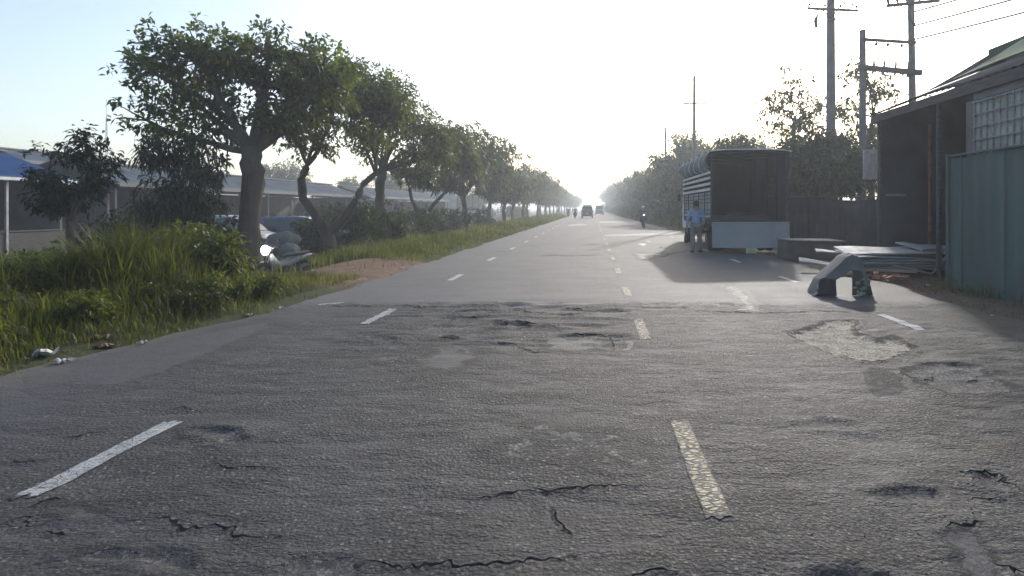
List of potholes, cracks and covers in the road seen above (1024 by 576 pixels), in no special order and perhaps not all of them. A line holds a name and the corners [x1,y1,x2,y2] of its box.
crack [353,554,578,575]
pothole [860,488,945,504]
pothole [187,426,249,445]
crack [456,483,641,537]
crack [141,517,282,542]
crack [945,468,1021,531]
